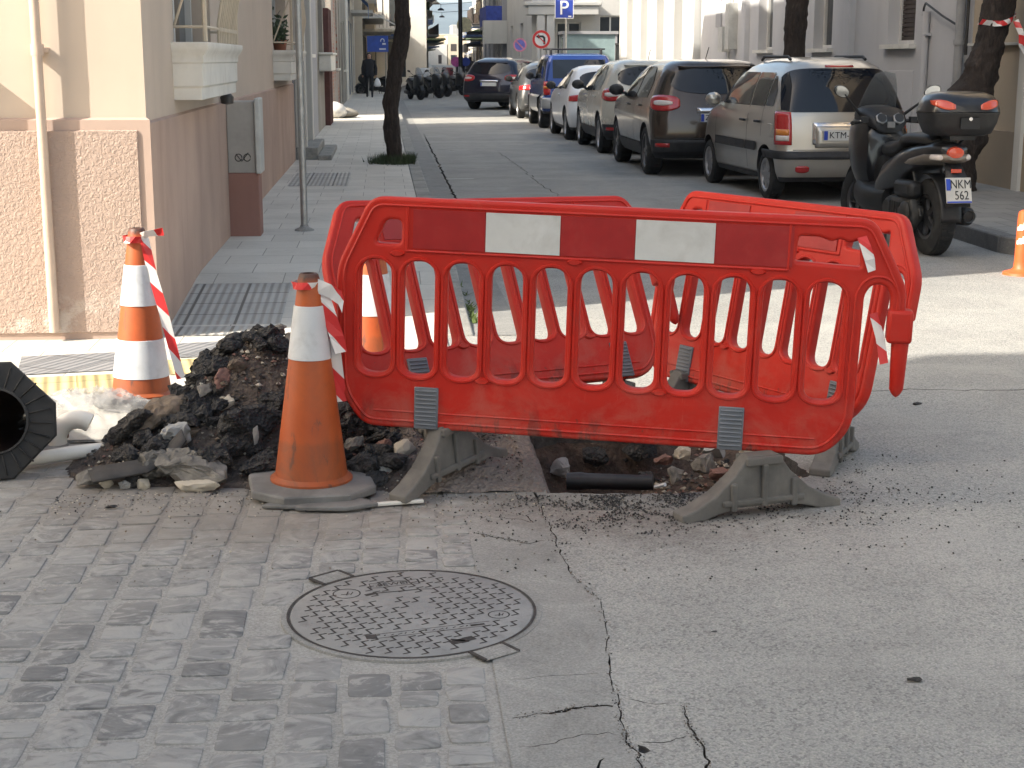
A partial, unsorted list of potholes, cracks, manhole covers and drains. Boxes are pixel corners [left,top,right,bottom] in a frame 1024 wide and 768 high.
manhole cover [281,569,542,664]
pothole [529,436,809,494]
crack [474,502,712,768]
